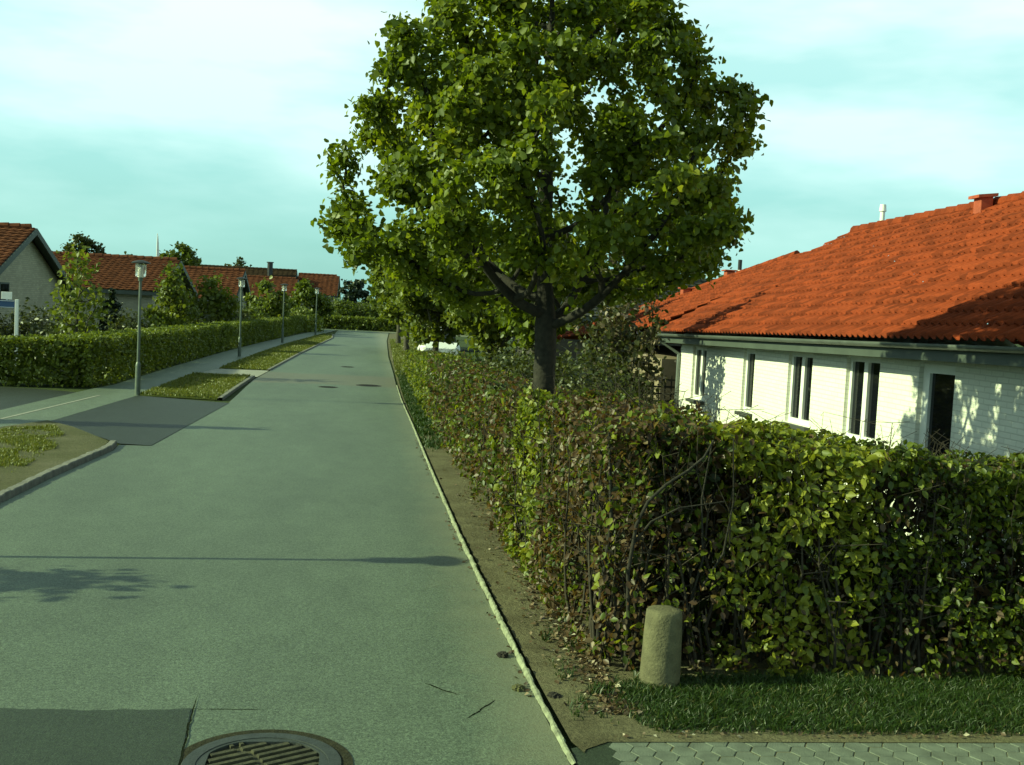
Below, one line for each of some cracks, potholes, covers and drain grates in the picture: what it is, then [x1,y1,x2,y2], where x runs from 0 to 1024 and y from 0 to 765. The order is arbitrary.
crack [178,695,198,765]
crack [425,683,495,718]
